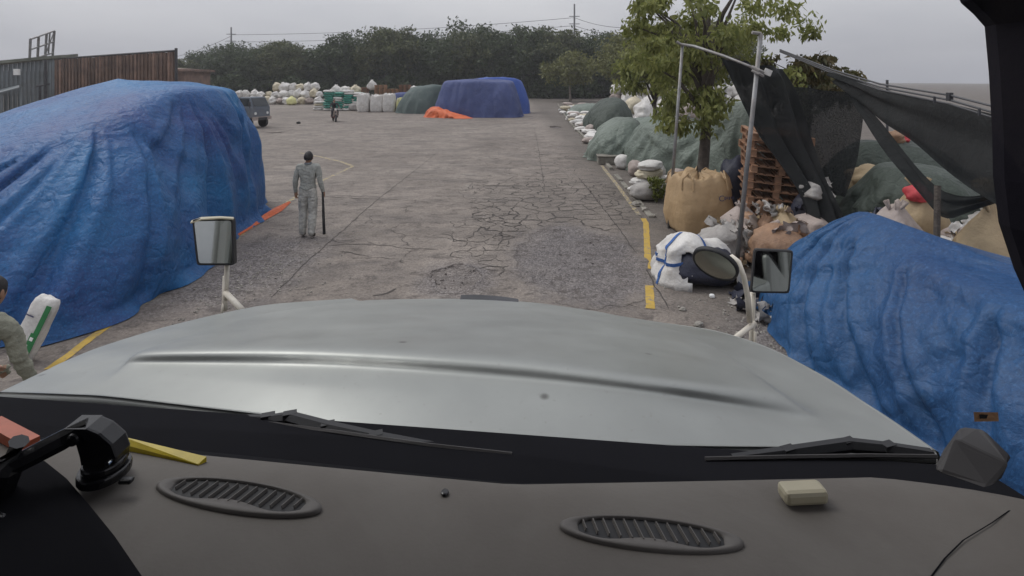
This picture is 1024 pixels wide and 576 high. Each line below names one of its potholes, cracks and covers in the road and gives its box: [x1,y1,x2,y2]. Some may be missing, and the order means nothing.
crack [274,129,669,308]
pothole [427,262,486,294]
